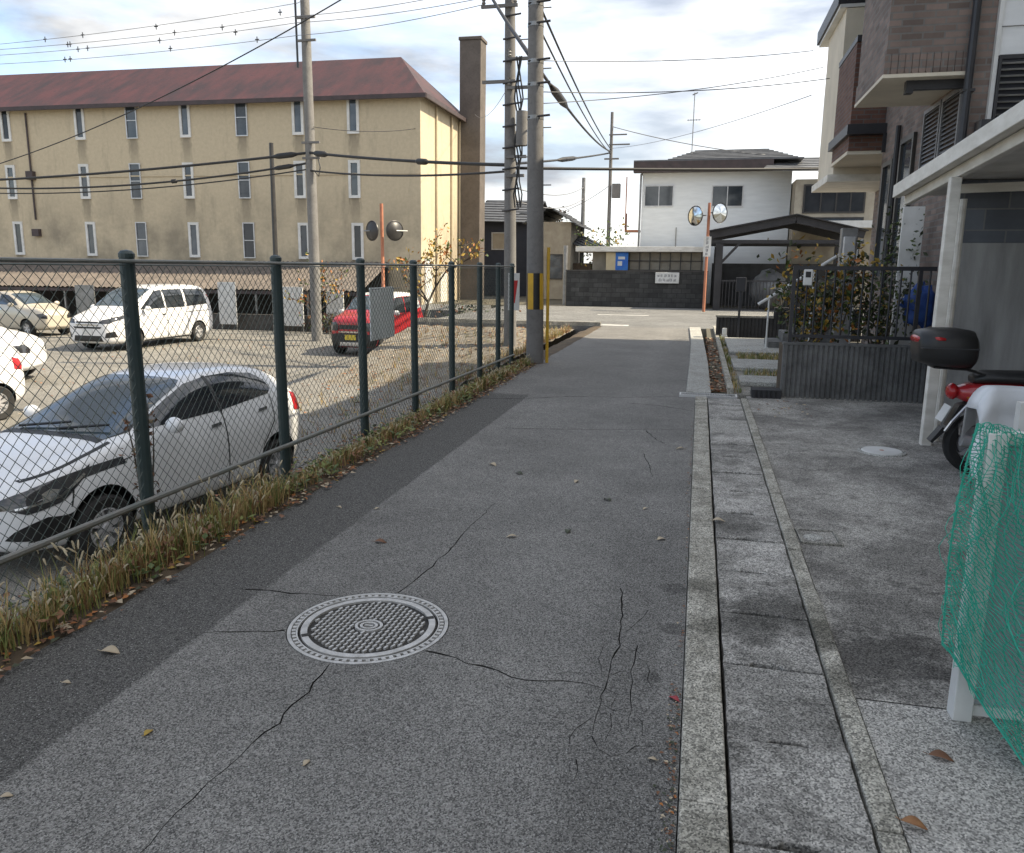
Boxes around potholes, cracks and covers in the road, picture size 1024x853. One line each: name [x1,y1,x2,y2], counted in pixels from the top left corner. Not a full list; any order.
crack [426,590,653,780]
crack [397,505,492,593]
crack [140,665,329,853]
utility cover [857,446,907,457]
crack [246,589,340,601]
manhole cover [287,593,448,665]
